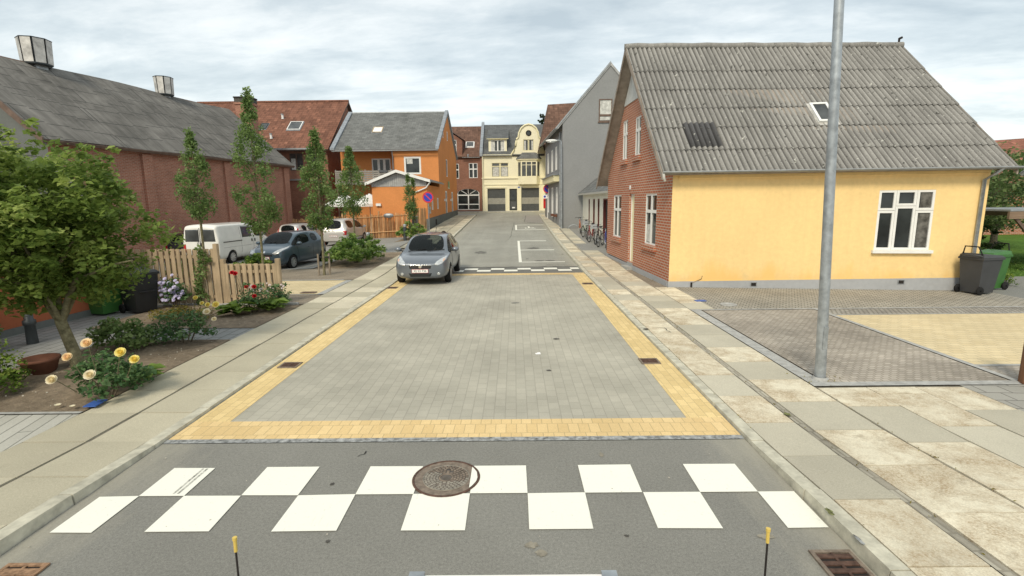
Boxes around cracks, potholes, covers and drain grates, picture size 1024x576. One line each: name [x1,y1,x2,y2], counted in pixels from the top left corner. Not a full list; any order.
manhole cover [412,460,480,497]
drain grate [0,563,50,576]
drain grate [808,549,875,576]
